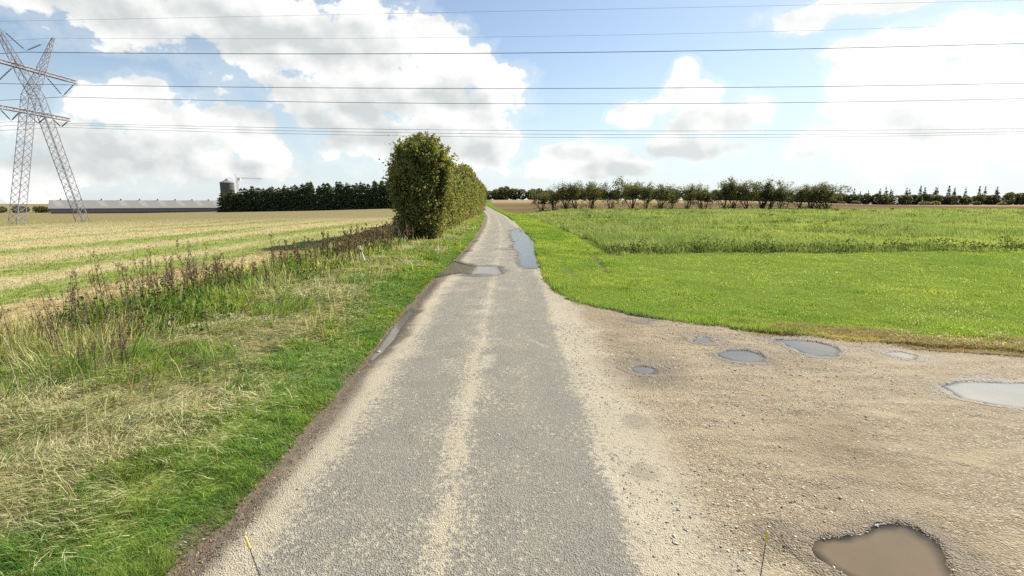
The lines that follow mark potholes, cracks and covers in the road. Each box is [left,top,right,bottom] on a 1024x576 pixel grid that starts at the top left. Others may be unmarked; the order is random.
pothole [705,346,778,365]
pothole [616,362,668,377]
pothole [764,337,852,359]
pothole [684,334,723,346]
pothole [872,349,930,362]
pothole [928,378,1024,411]
pothole [781,513,980,576]
